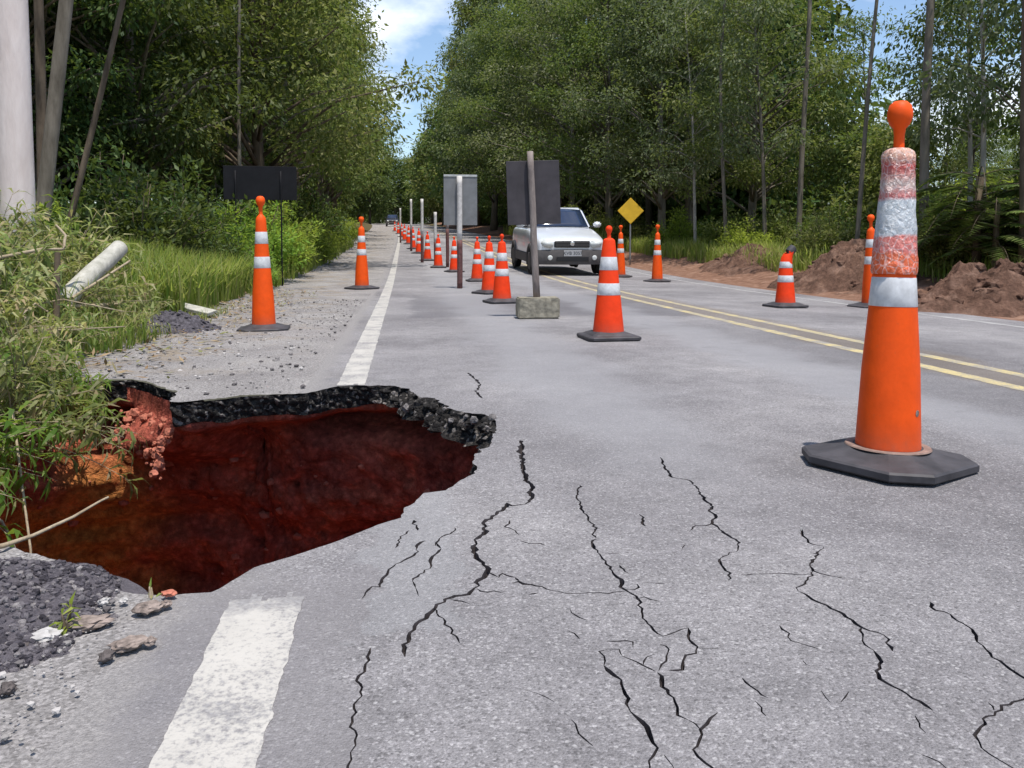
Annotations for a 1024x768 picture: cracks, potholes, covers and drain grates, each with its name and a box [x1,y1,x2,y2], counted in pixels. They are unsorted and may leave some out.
crack [362,440,718,768]
crack [972,698,1024,768]
crack [467,373,482,398]
crack [929,594,1024,679]
crack [346,649,371,768]
crack [661,458,932,733]
